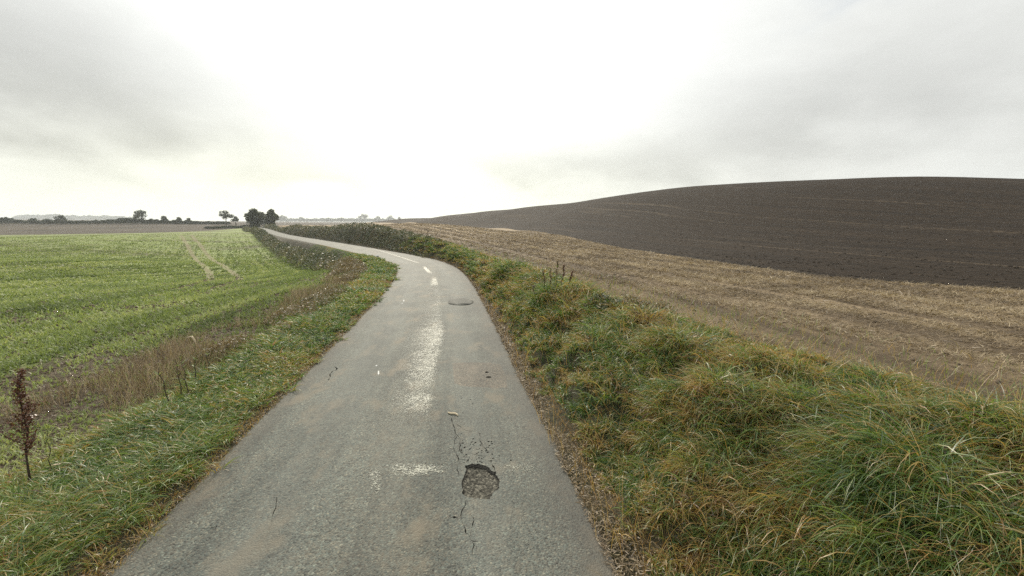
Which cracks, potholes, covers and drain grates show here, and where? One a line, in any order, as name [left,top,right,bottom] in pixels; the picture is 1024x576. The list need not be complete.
pothole [462,463,500,499]
crack [451,398,512,480]
crack [460,502,478,556]
